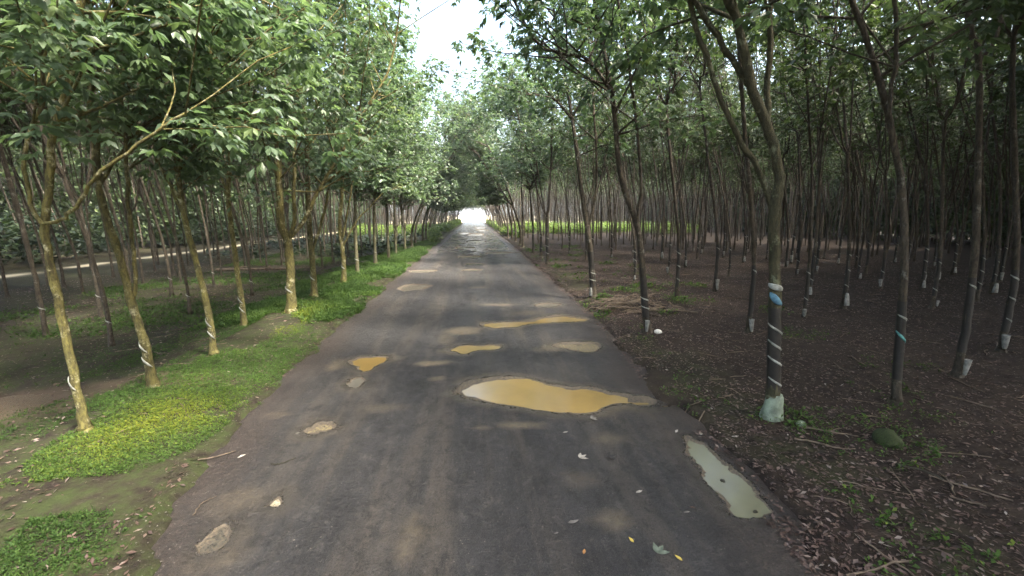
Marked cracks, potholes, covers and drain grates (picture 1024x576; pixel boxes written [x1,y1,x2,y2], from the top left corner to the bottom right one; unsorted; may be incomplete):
pothole [303,421,337,436]
pothole [346,376,369,388]
pothole [450,343,502,354]
pothole [454,375,658,414]
pothole [480,314,590,328]
pothole [684,434,773,521]
pothole [552,341,601,352]
pothole [344,356,389,372]
